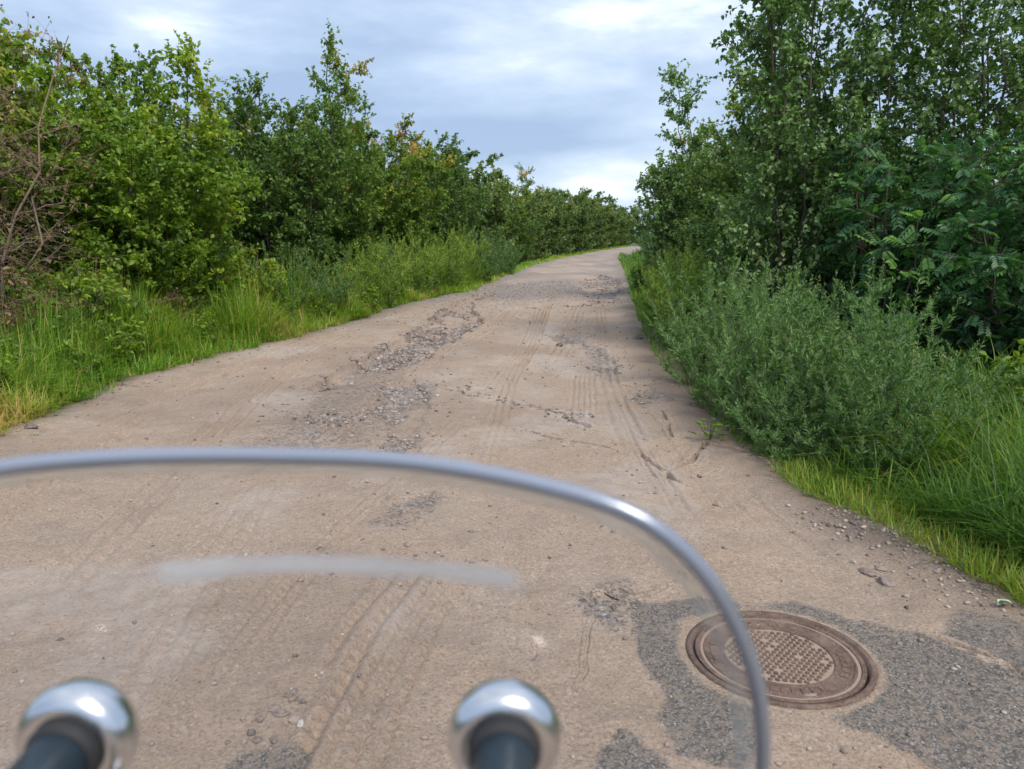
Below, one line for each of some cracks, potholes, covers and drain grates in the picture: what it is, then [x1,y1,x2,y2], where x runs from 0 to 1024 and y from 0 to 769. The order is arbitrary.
crack [419,383,718,489]
pothole [577,275,624,308]
pothole [302,292,497,395]
pothole [583,584,651,621]
pothole [372,374,440,453]
pothole [292,408,382,427]
manhole cover [686,611,878,709]
pothole [384,491,446,531]
crack [571,581,683,693]
